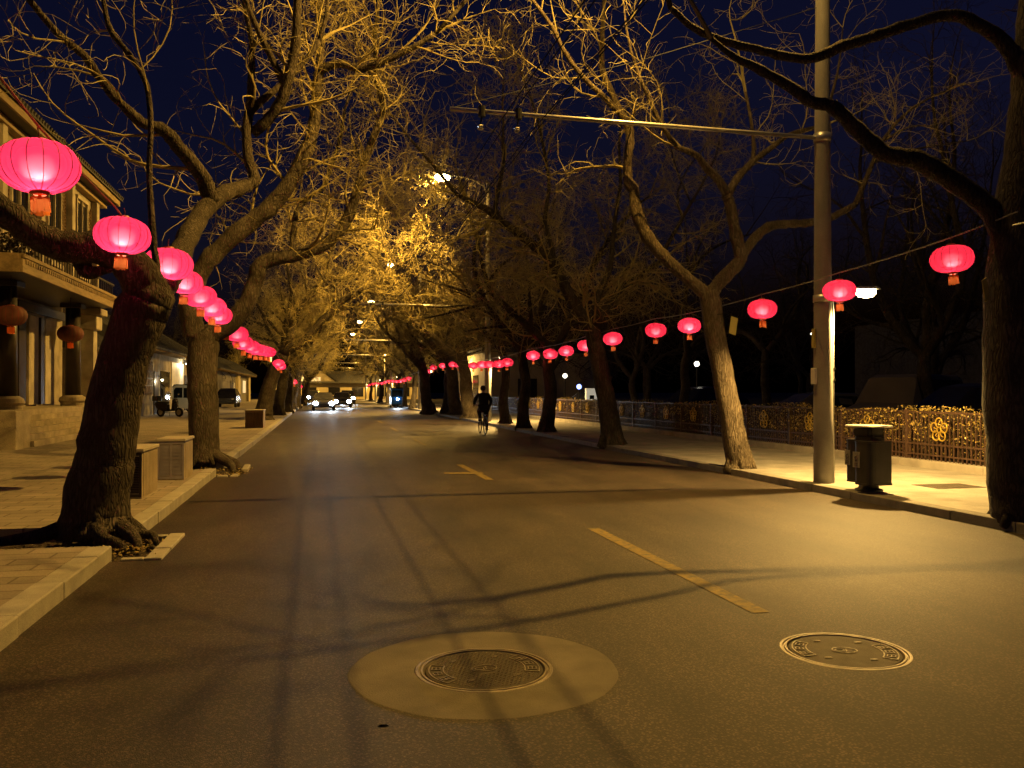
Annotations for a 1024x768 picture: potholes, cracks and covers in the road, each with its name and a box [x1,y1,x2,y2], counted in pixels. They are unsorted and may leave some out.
manhole cover [779,633,914,671]
